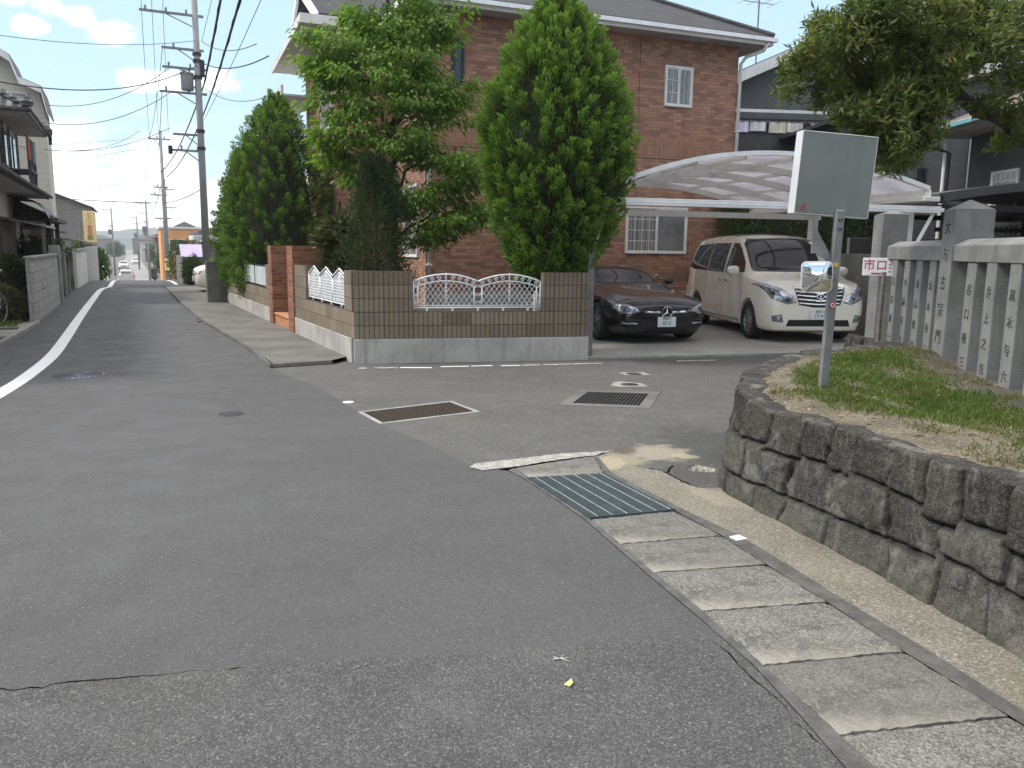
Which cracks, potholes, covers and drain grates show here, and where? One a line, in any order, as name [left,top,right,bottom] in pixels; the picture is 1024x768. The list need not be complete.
drain grate [527,473,676,524]
crack [0,667,242,691]
crack [713,641,820,744]
drain grate [358,401,480,424]
crack [647,465,697,487]
drain grate [558,390,661,409]
manhole cover [49,371,107,379]
